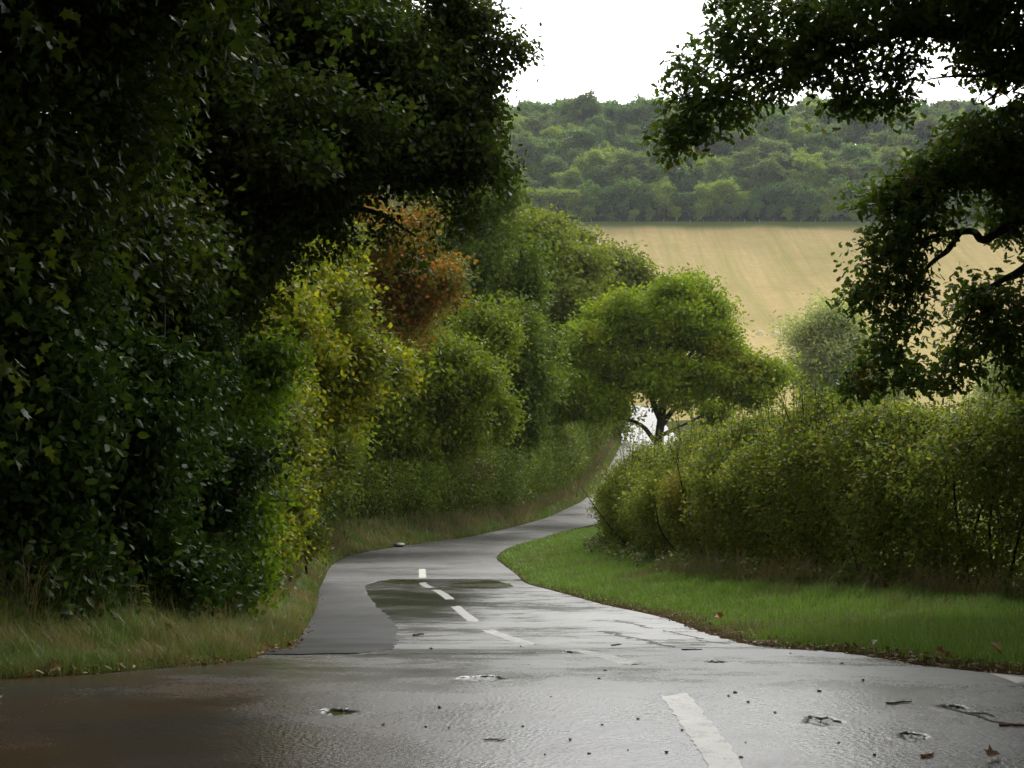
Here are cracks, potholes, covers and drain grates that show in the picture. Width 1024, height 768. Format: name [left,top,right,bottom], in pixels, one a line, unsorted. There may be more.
crack [940,705,1019,724]
pothole [436,674,523,684]
pothole [303,705,377,719]
pothole [784,712,863,730]
crack [597,620,725,647]
pothole [878,728,949,746]
